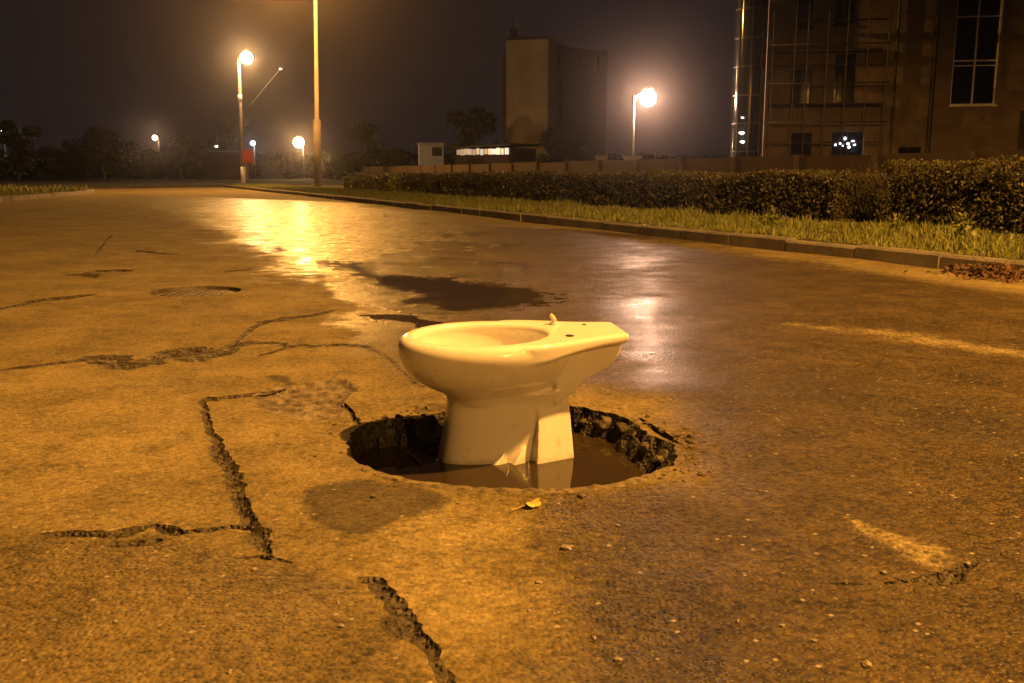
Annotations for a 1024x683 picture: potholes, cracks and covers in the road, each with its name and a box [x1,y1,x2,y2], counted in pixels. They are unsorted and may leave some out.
pothole [313,402,724,504]
crack [356,576,456,683]
crack [807,547,1024,587]
crack [0,234,426,564]
